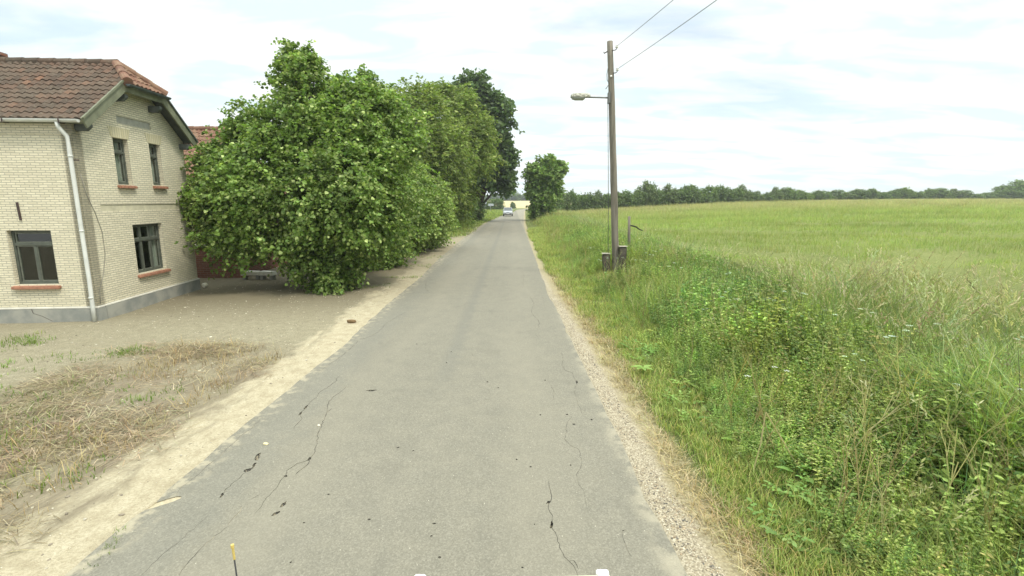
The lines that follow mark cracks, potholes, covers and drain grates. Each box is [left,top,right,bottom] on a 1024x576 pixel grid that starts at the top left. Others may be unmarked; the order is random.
crack [548,486,578,576]
crack [146,314,402,571]
crack [551,356,589,514]
